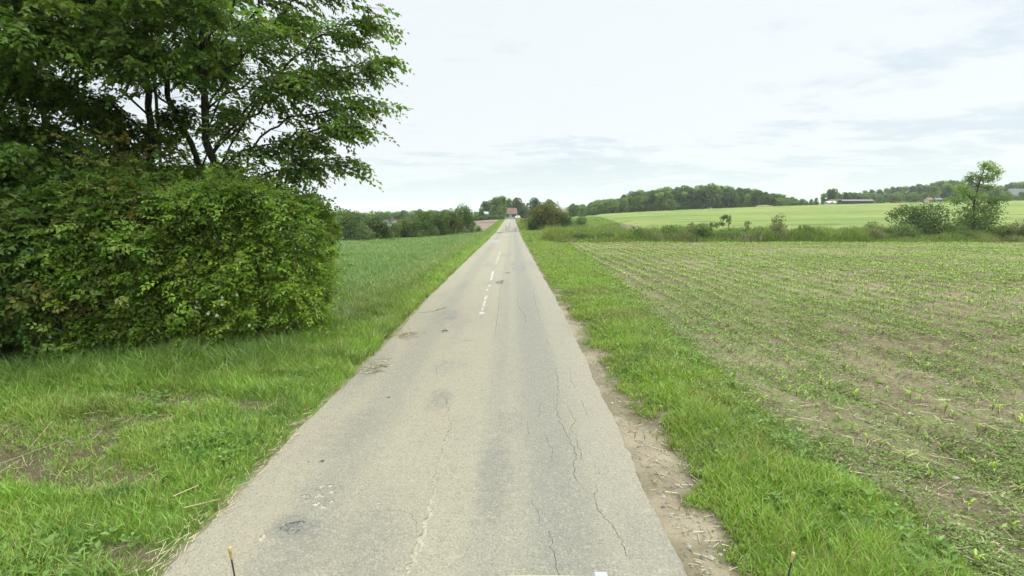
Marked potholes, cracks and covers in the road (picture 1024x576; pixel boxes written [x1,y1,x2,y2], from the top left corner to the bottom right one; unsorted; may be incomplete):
crack [526,365,642,557]
pothole [279,521,305,535]
